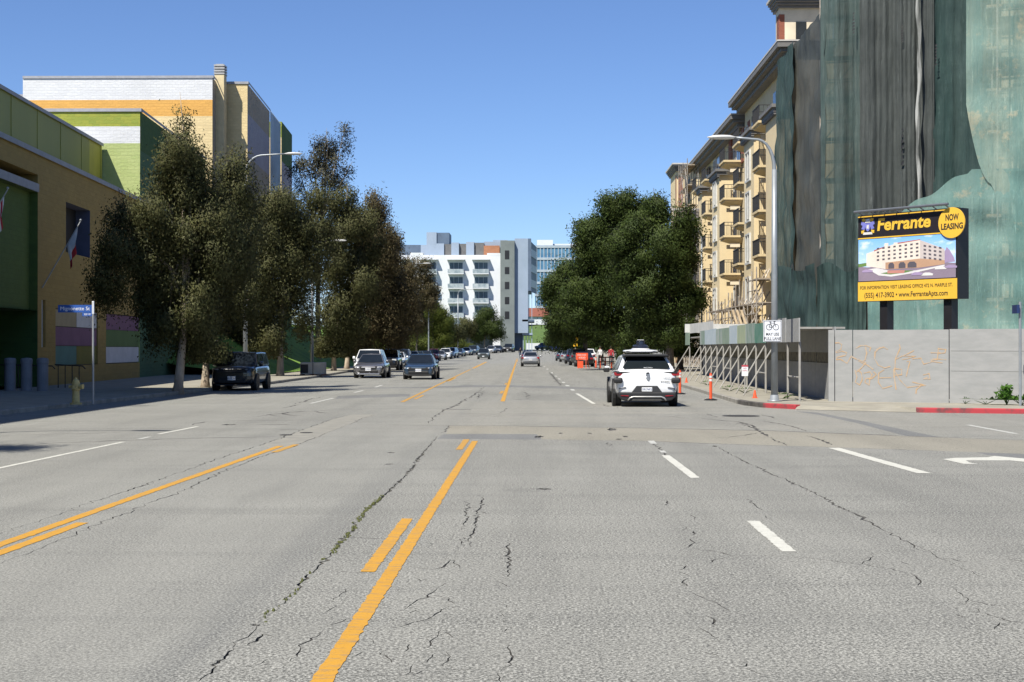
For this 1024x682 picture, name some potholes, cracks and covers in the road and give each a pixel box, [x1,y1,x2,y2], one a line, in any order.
crack [234,590,347,669]
crack [428,371,486,433]
crack [665,501,1016,674]
crack [667,414,979,576]
crack [353,495,485,676]
crack [497,543,514,682]
